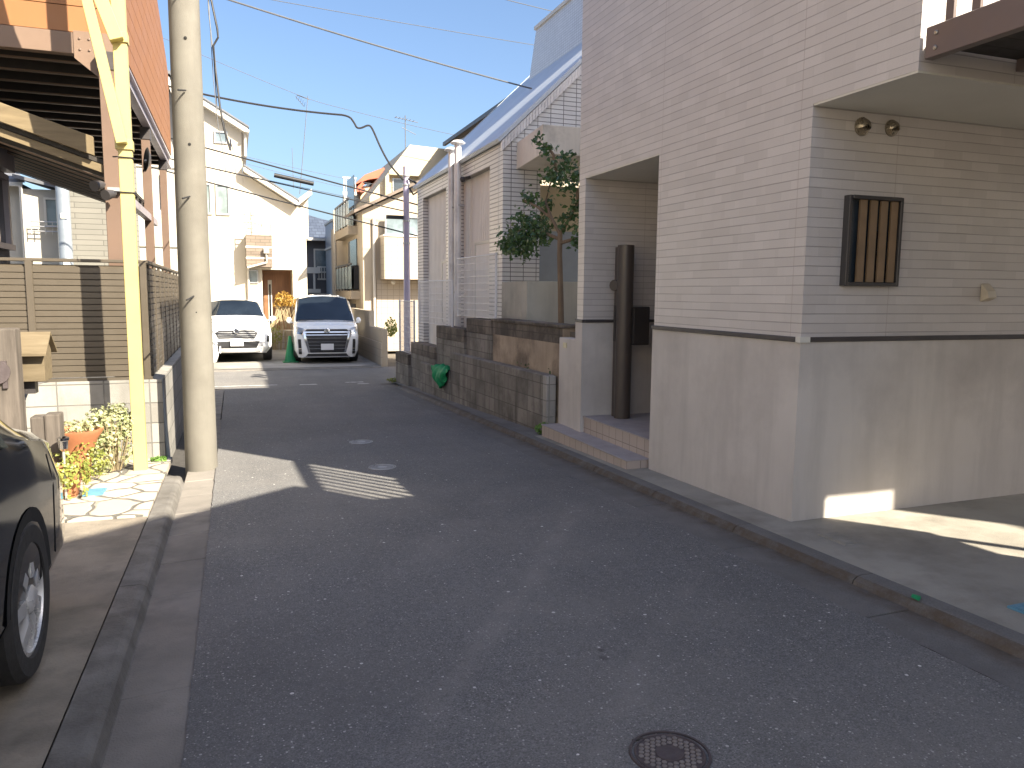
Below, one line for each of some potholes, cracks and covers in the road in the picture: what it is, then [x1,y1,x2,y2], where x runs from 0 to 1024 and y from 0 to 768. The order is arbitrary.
manhole cover [629,730,712,768]
